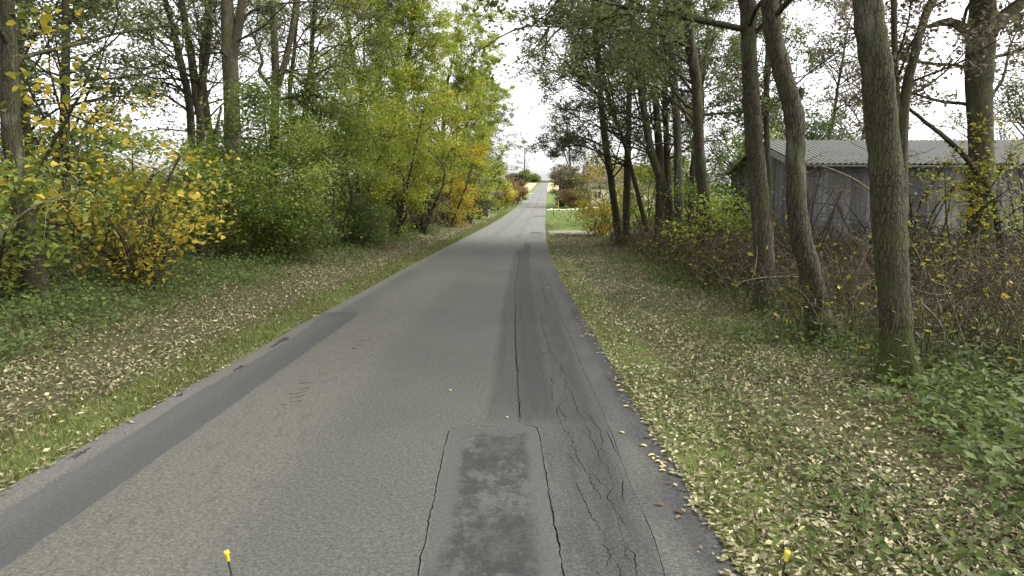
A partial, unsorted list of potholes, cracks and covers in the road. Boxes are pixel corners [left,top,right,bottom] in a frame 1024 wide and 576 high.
crack [538,268,665,576]
